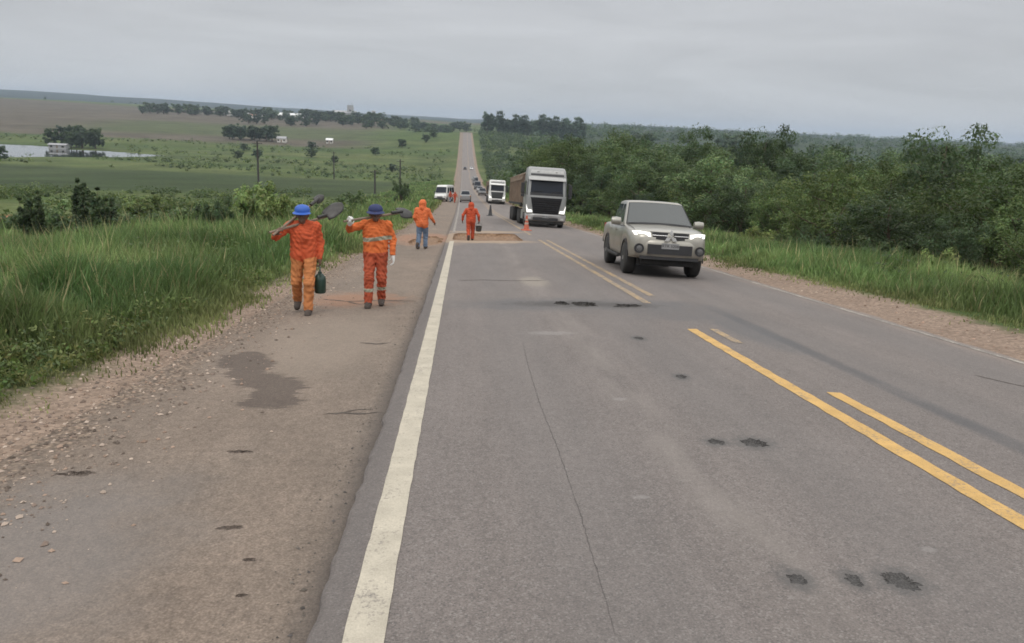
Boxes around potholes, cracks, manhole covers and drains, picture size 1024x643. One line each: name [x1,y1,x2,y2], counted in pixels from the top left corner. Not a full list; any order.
crack [524,349,616,634]
pothole [786,574,808,585]
pothole [844,574,864,587]
pothole [739,438,769,447]
pothole [879,572,923,592]
